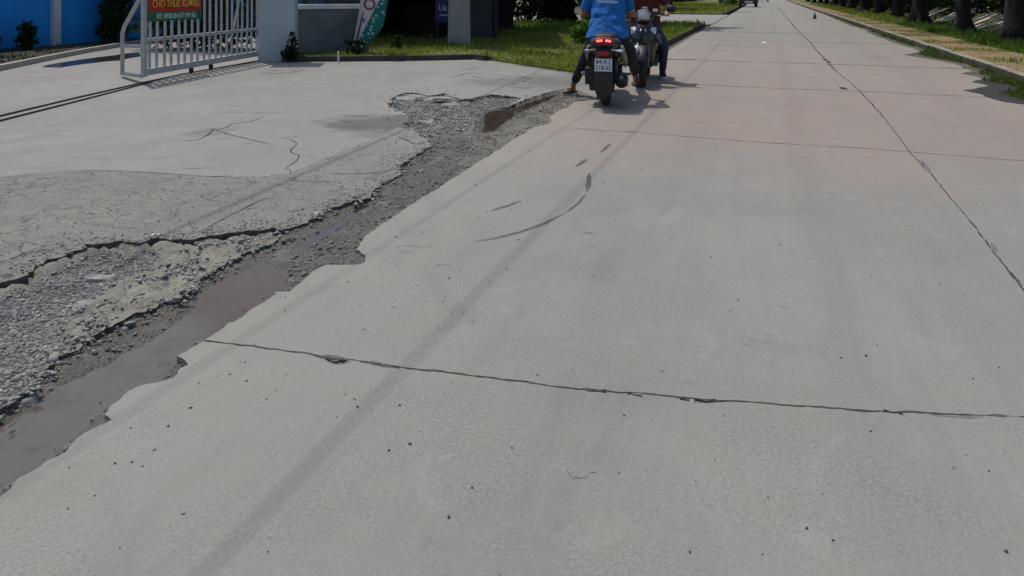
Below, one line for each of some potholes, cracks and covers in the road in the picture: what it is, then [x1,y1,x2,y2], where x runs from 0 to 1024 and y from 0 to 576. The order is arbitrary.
crack [0,241,71,262]
pothole [0,89,592,497]
crack [178,105,393,234]
